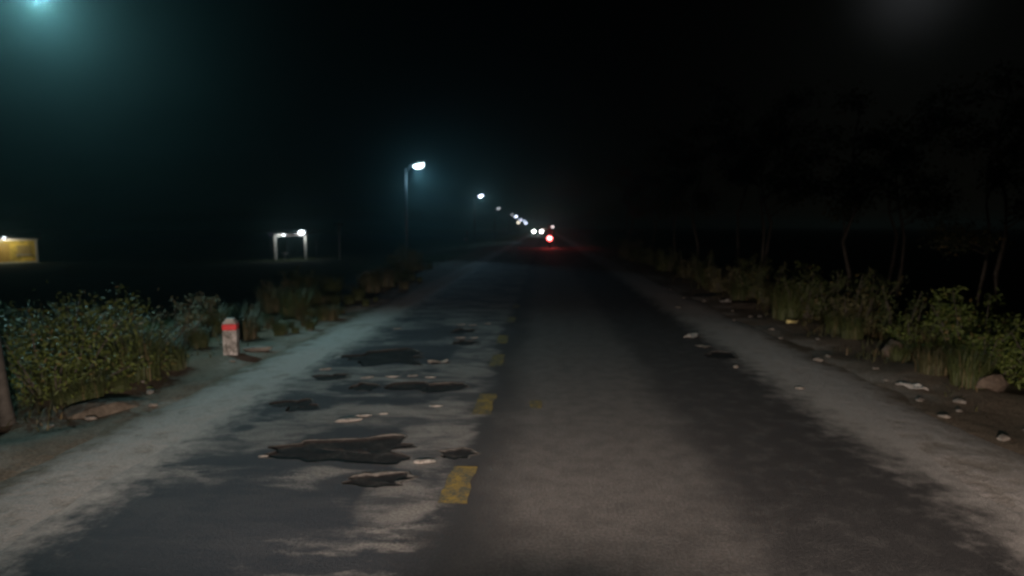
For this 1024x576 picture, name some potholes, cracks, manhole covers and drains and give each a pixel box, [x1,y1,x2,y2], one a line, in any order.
pothole [436,447,482,460]
pothole [331,348,426,367]
pothole [341,471,419,488]
pothole [383,381,471,393]
pothole [269,398,320,412]
pothole [310,373,354,381]
pothole [258,433,418,466]
pothole [703,350,739,359]
